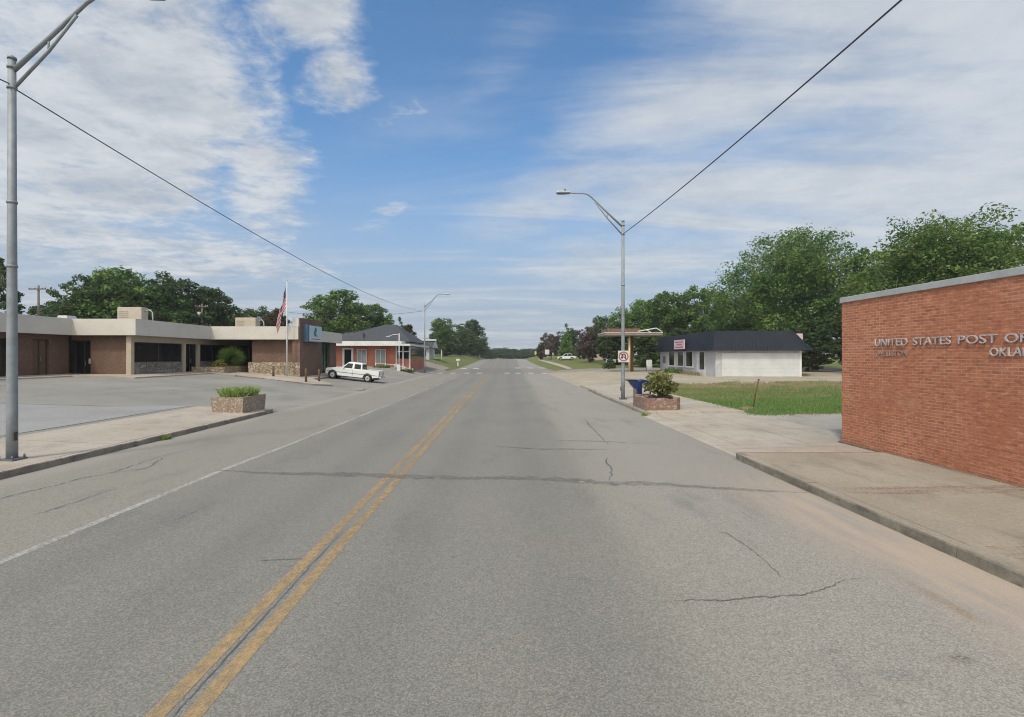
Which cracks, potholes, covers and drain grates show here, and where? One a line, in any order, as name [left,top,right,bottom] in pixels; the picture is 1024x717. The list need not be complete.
crack [660,578,869,603]
crack [3,451,181,514]
